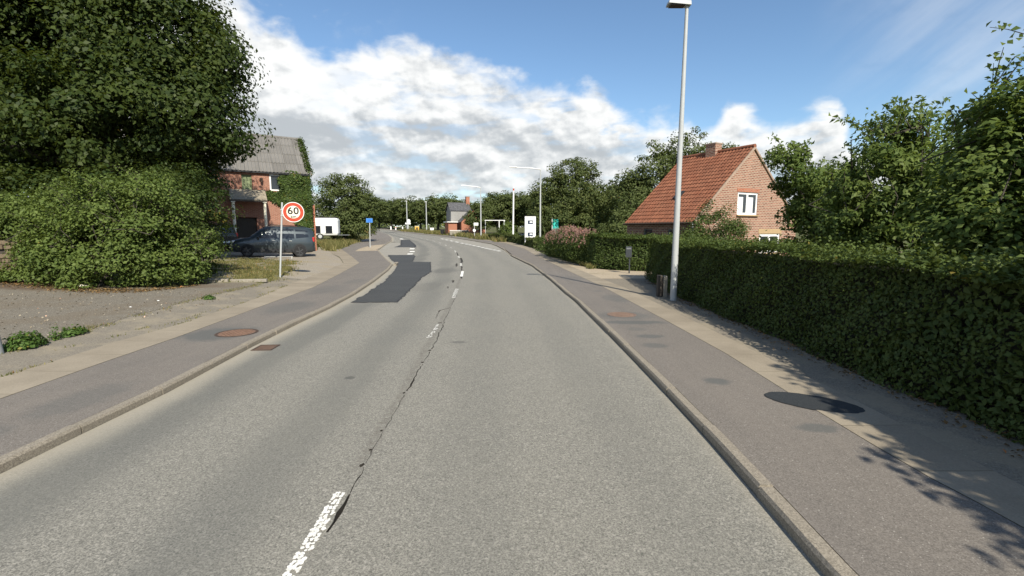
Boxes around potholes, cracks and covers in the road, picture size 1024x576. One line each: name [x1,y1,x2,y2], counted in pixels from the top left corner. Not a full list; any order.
crack [326,296,457,532]
manhole cover [214,329,259,337]
